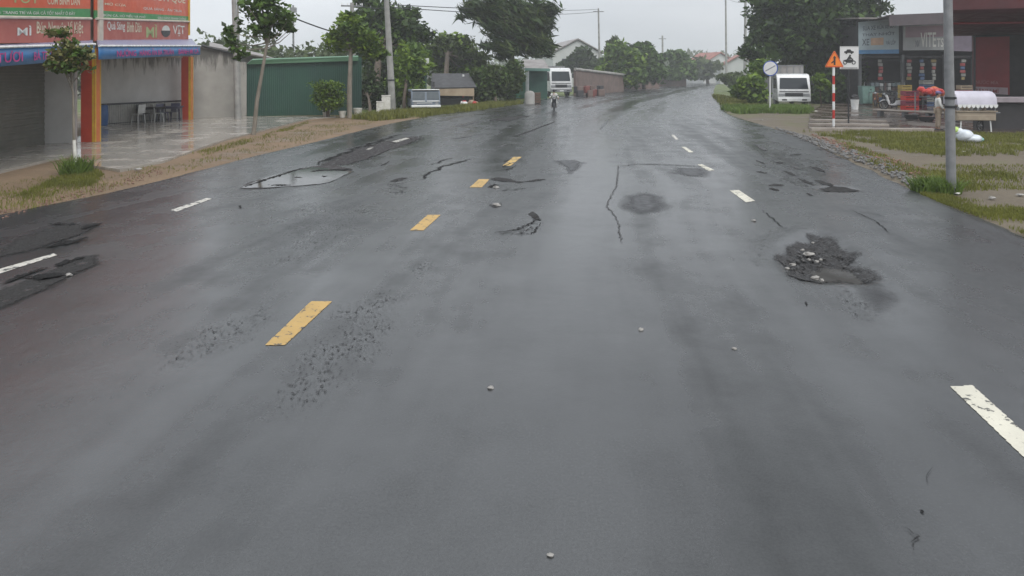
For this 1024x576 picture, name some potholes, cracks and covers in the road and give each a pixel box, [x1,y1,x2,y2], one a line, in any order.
pothole [240,165,354,189]
pothole [775,233,885,300]
crack [421,158,472,180]
